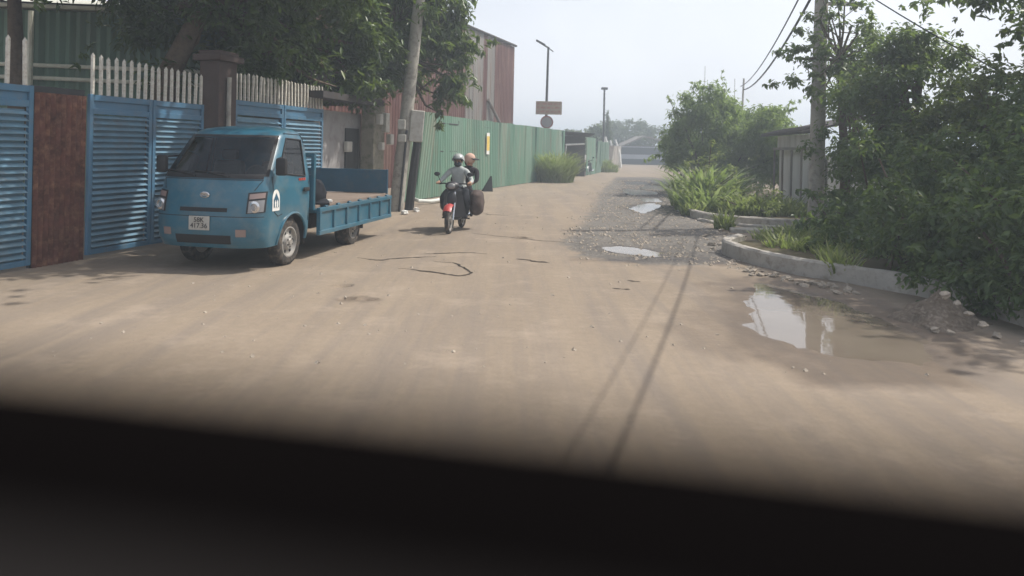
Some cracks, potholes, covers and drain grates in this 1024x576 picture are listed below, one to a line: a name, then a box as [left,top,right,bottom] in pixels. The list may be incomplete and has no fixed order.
crack [365,252,483,276]
pothole [730,281,958,369]
pothole [597,245,667,258]
